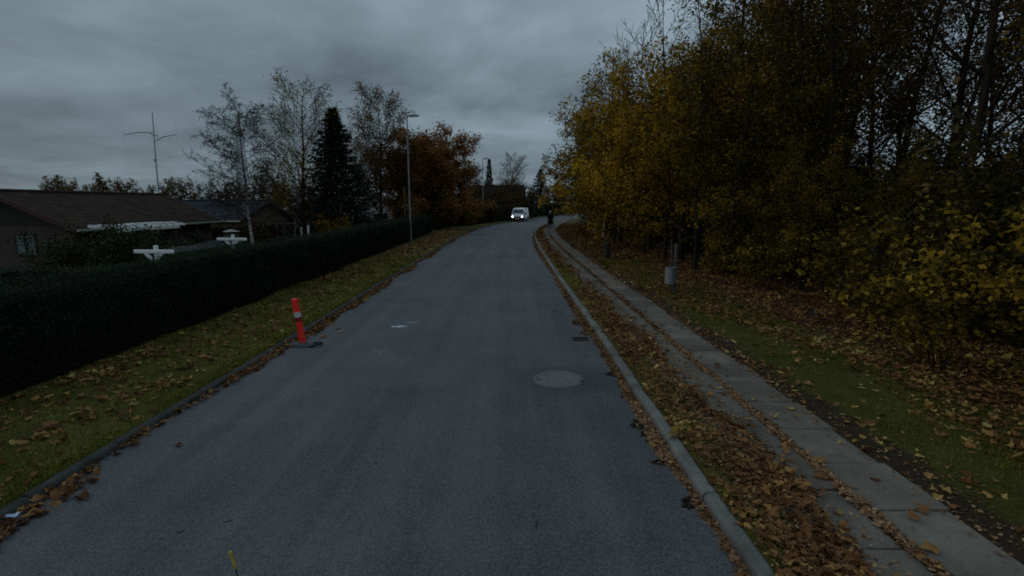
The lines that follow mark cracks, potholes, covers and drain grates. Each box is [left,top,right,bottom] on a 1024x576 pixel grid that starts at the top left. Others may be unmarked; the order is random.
manhole cover [533,371,583,388]
